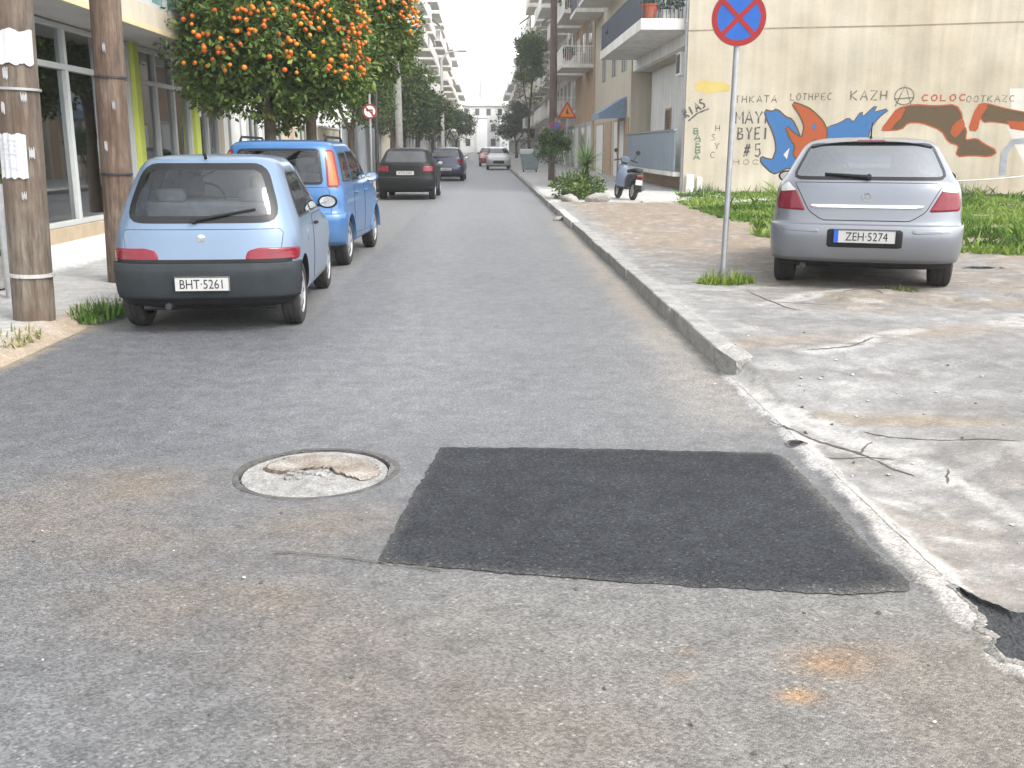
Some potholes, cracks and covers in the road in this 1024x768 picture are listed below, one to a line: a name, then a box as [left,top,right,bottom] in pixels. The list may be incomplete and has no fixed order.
pothole [947,583,1024,666]
crack [808,337,873,350]
crack [769,420,1017,476]
crack [752,288,914,311]
manhole cover [232,448,401,500]
